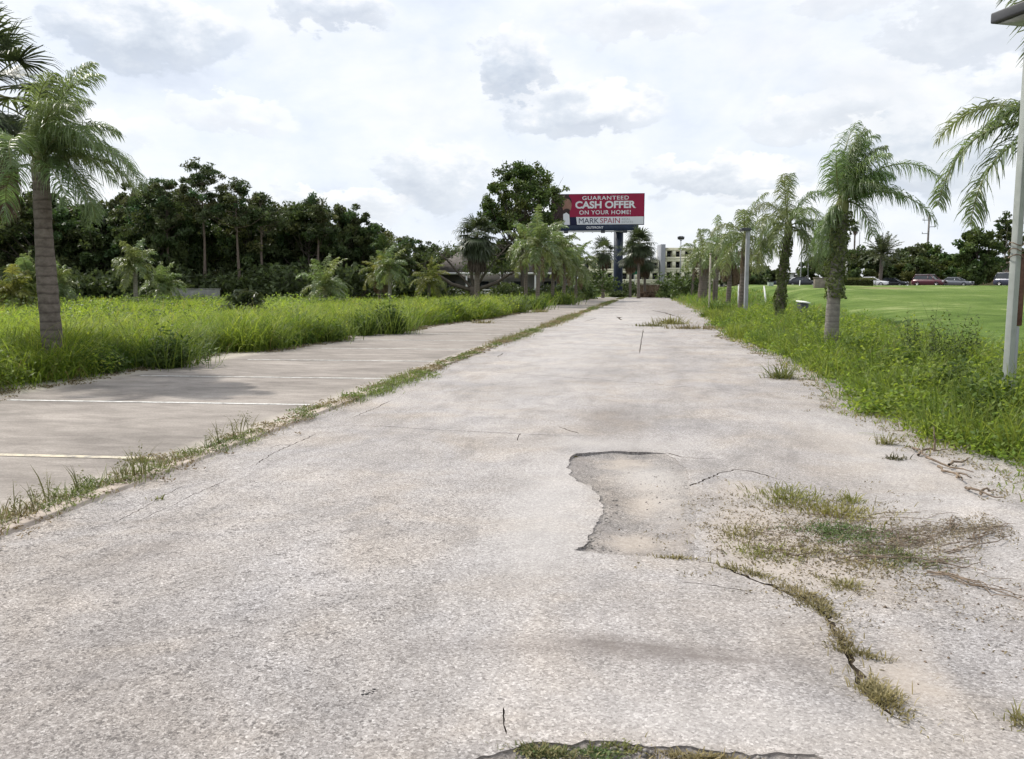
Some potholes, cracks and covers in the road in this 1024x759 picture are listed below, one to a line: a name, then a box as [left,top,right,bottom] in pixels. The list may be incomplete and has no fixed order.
crack [682,560,900,720]
crack [669,453,777,486]
crack [135,400,392,523]
pothole [566,451,699,557]
